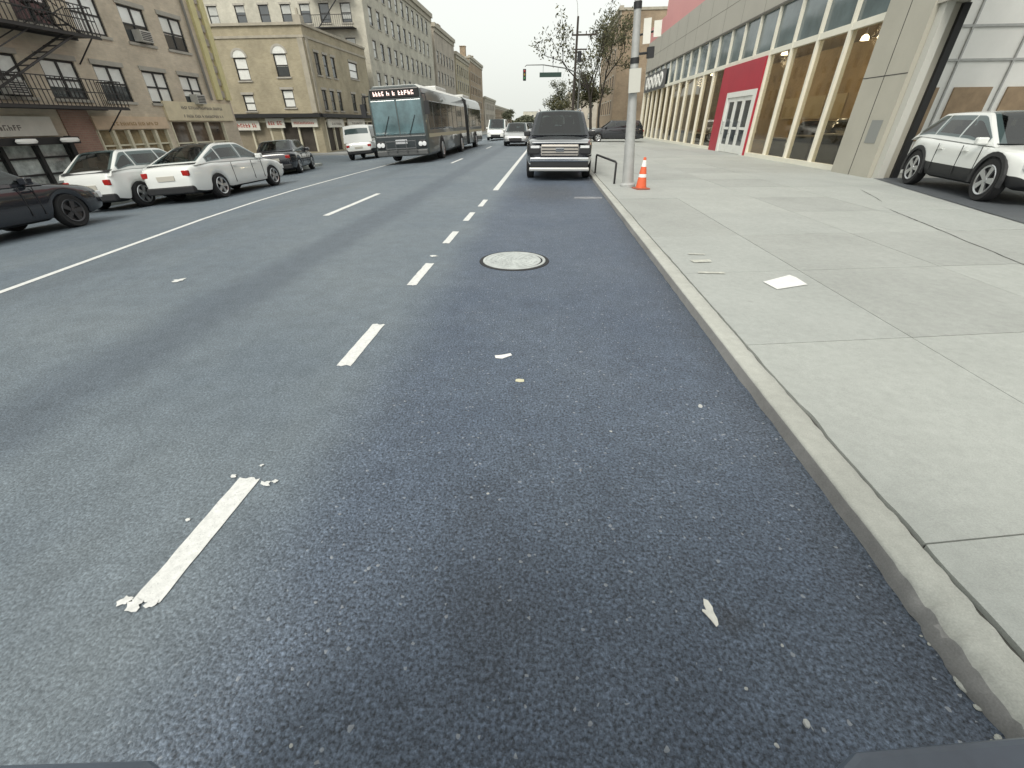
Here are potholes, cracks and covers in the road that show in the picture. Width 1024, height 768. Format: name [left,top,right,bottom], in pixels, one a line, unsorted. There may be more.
manhole cover [479,251,549,271]
